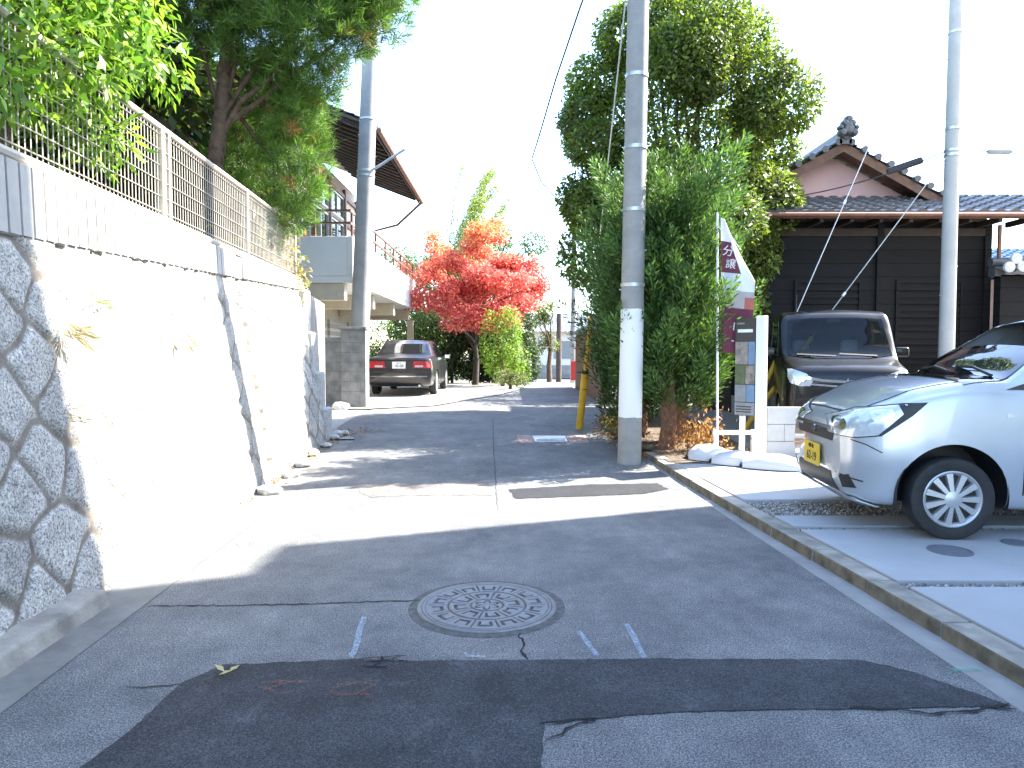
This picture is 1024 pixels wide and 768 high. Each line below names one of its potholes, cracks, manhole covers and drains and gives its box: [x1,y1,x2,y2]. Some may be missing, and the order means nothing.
manhole cover [408,581,565,638]
crack [518,633,528,659]
crack [359,655,406,667]
crack [540,718,599,740]
manhole cover [516,435,589,443]
